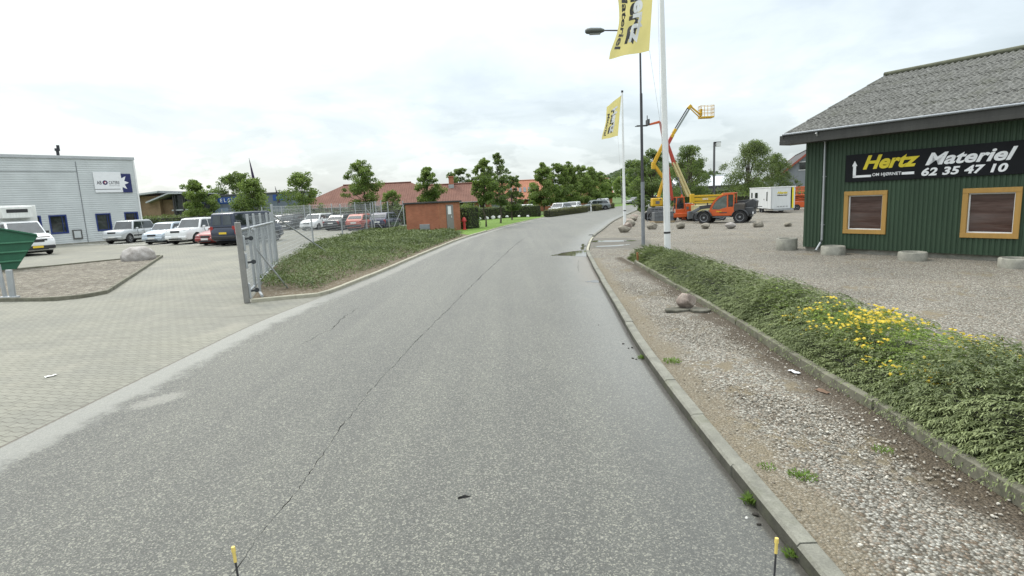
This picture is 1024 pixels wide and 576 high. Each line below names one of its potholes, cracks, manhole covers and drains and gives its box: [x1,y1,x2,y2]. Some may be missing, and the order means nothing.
crack [229,245,515,576]
